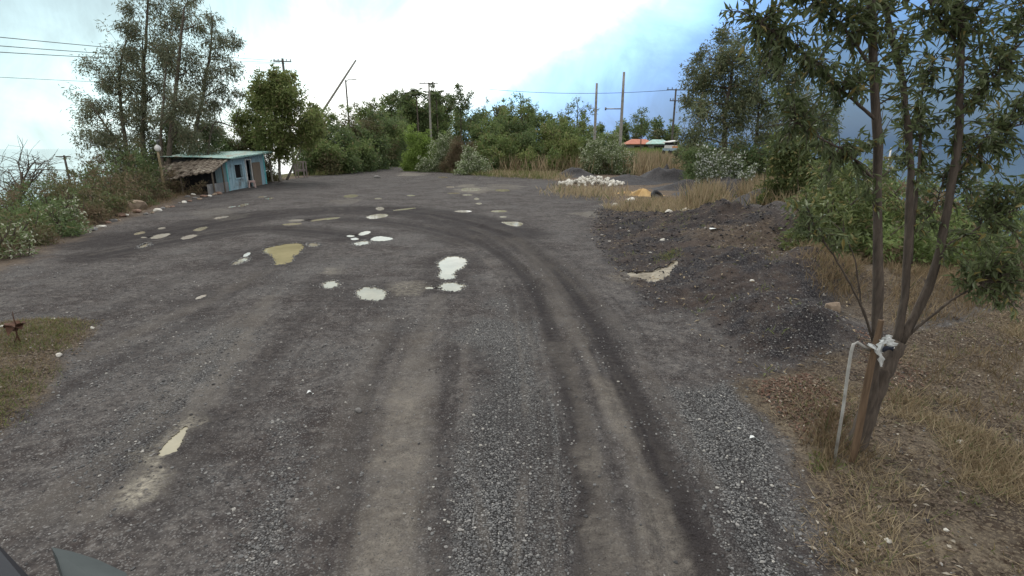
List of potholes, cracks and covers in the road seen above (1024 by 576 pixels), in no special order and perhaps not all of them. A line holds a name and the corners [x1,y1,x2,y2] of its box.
pothole [429,254,476,281]
pothole [345,285,397,304]
pothole [344,239,378,248]
pothole [146,422,198,462]
pothole [432,280,474,294]
pothole [311,278,349,291]
pothole [172,233,207,241]
pothole [222,256,259,267]
pothole [359,212,395,220]
pothole [350,230,378,238]
pothole [255,242,311,267]
